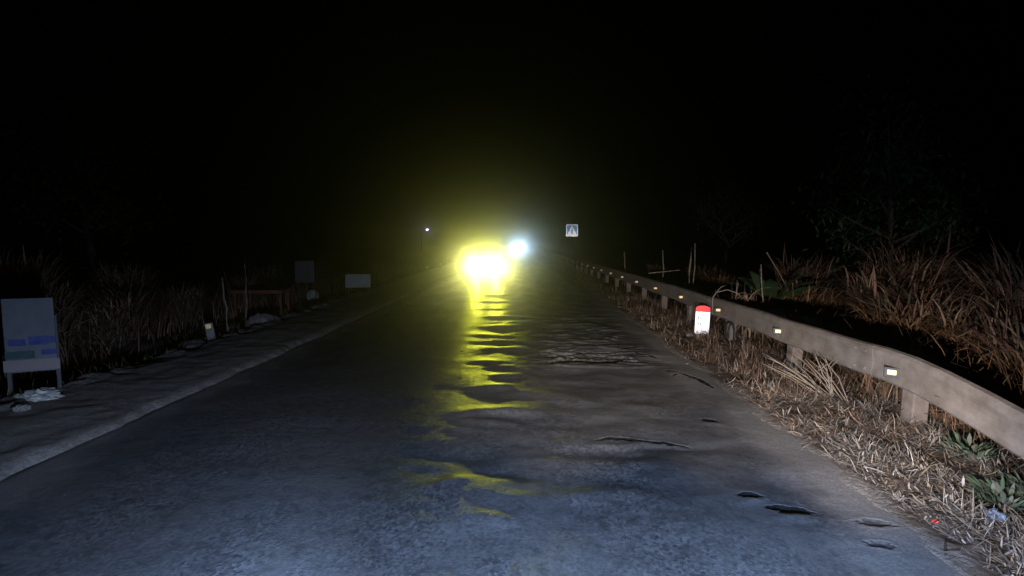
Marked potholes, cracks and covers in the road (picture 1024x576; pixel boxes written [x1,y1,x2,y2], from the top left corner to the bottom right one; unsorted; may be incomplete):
pothole [842,515,909,530]
crack [593,435,689,451]
crack [582,336,718,389]
pothole [756,501,824,518]
pothole [728,489,773,502]
pothole [853,537,907,553]
